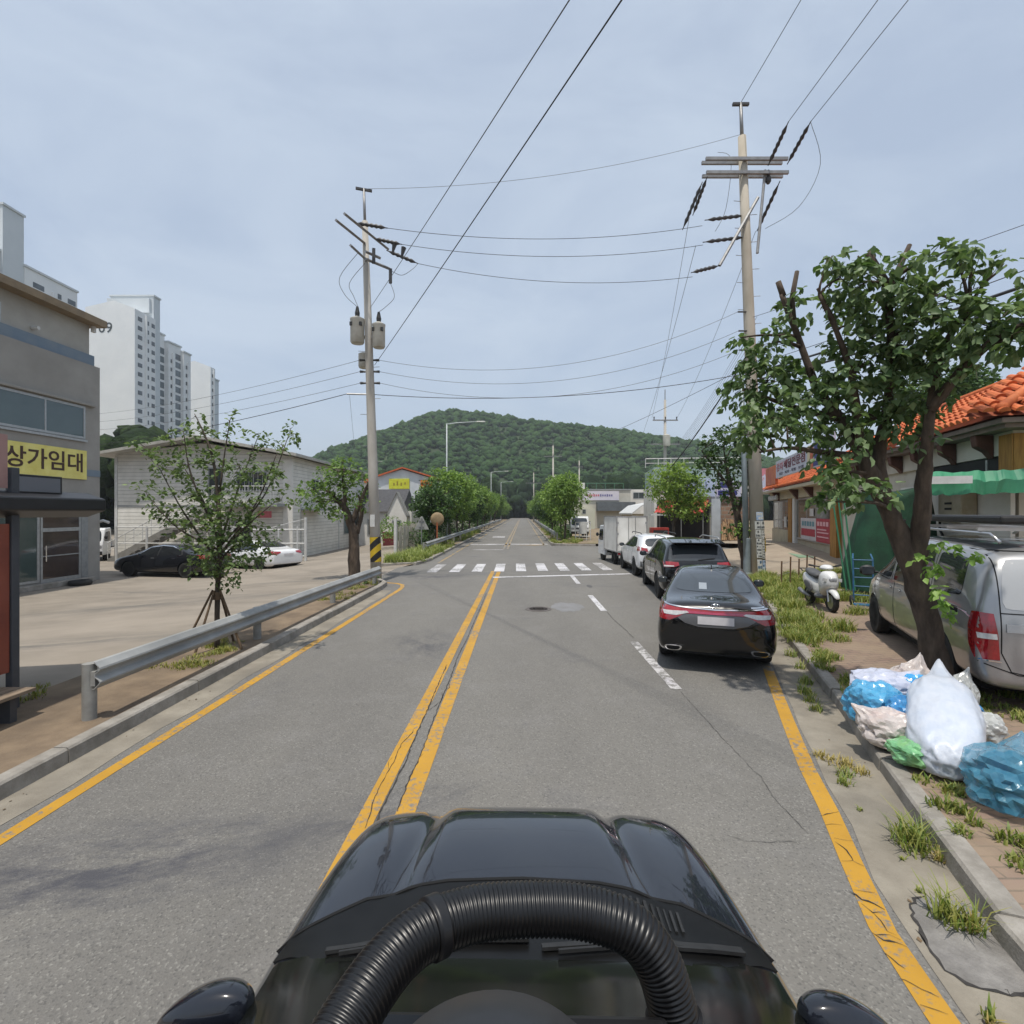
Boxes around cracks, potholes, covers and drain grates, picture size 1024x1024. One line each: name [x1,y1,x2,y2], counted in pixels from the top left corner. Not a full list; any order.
crack [682,693,808,844]
